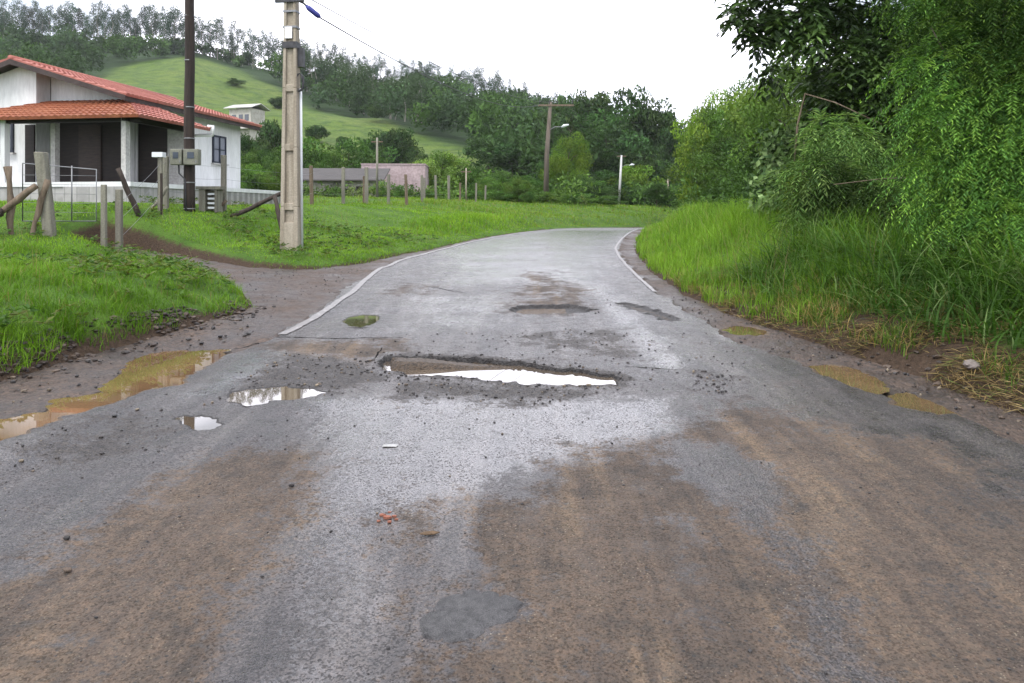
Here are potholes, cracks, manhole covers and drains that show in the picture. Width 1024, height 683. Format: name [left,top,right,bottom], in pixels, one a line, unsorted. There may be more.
pothole [226,385,328,407]
pothole [507,304,600,314]
pothole [887,392,960,416]
pothole [809,364,890,397]
pothole [0,349,231,441]
pothole [377,355,622,386]
pothole [615,302,682,322]
pothole [342,315,381,327]
